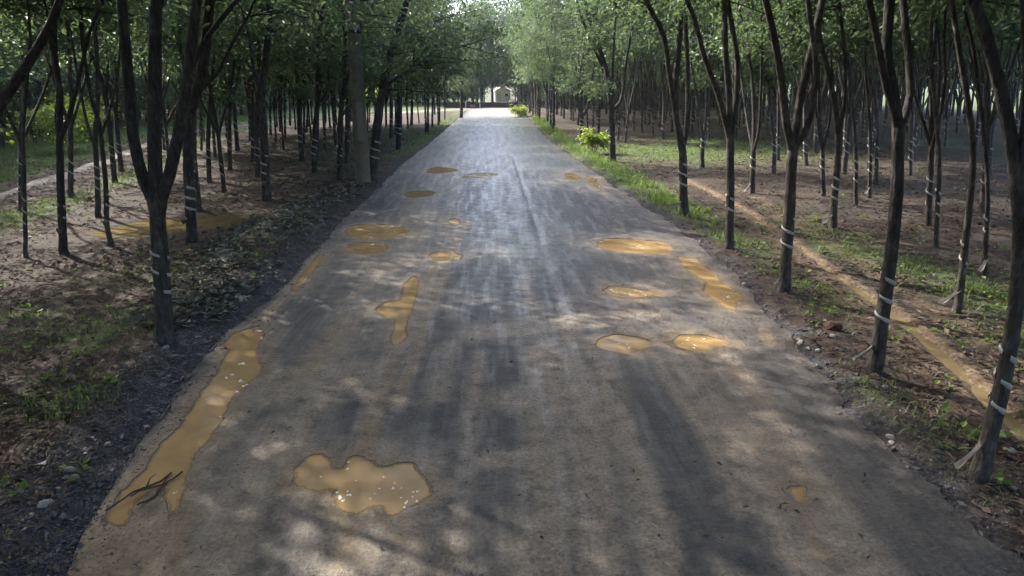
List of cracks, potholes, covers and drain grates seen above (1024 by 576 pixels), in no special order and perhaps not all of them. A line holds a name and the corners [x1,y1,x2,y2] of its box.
pothole [429,251,463,261]
pothole [291,453,435,517]
pothole [404,190,436,198]
pothole [594,334,653,354]
pothole [345,224,410,239]
pothole [786,485,808,505]
pothole [426,166,457,174]
pothole [586,176,601,189]
pothole [596,238,673,254]
pothole [375,275,420,346]
pothole [672,334,728,351]
pothole [602,286,663,299]
